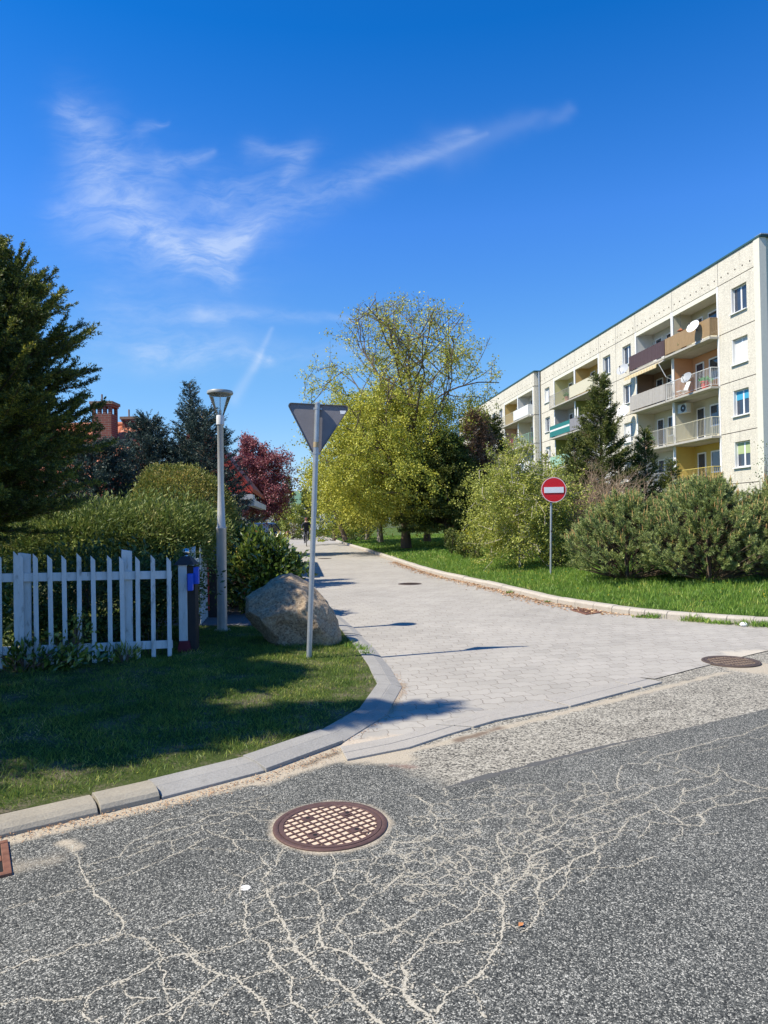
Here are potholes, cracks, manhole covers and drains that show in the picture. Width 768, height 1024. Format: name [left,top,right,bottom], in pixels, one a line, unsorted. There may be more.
manhole cover [273,801,388,852]
manhole cover [701,656,762,668]
crack [0,724,768,1024]
drain grate [0,839,12,878]
